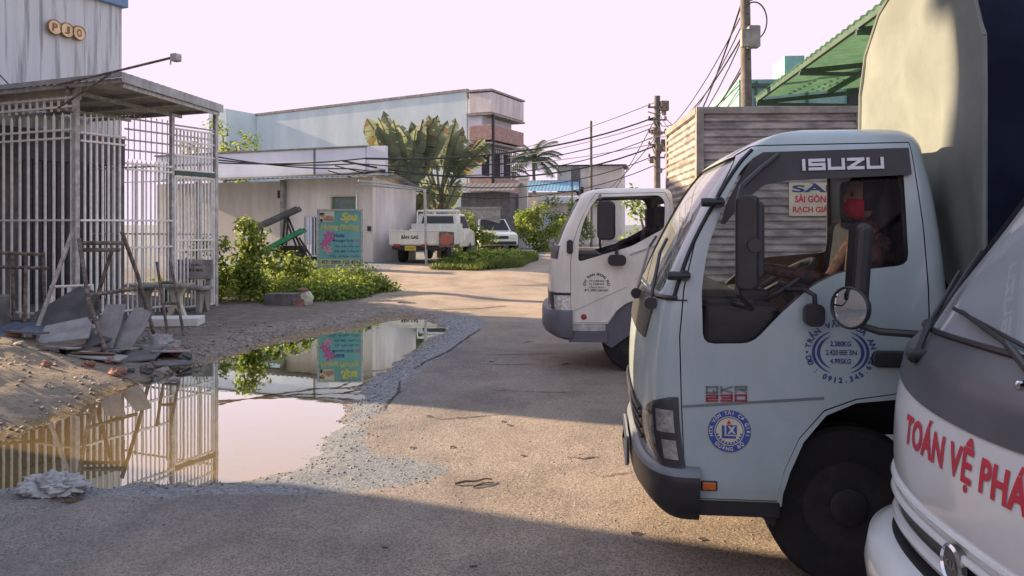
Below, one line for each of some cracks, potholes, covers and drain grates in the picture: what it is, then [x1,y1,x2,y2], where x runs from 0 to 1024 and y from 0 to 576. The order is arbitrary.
pothole [0,313,448,486]
